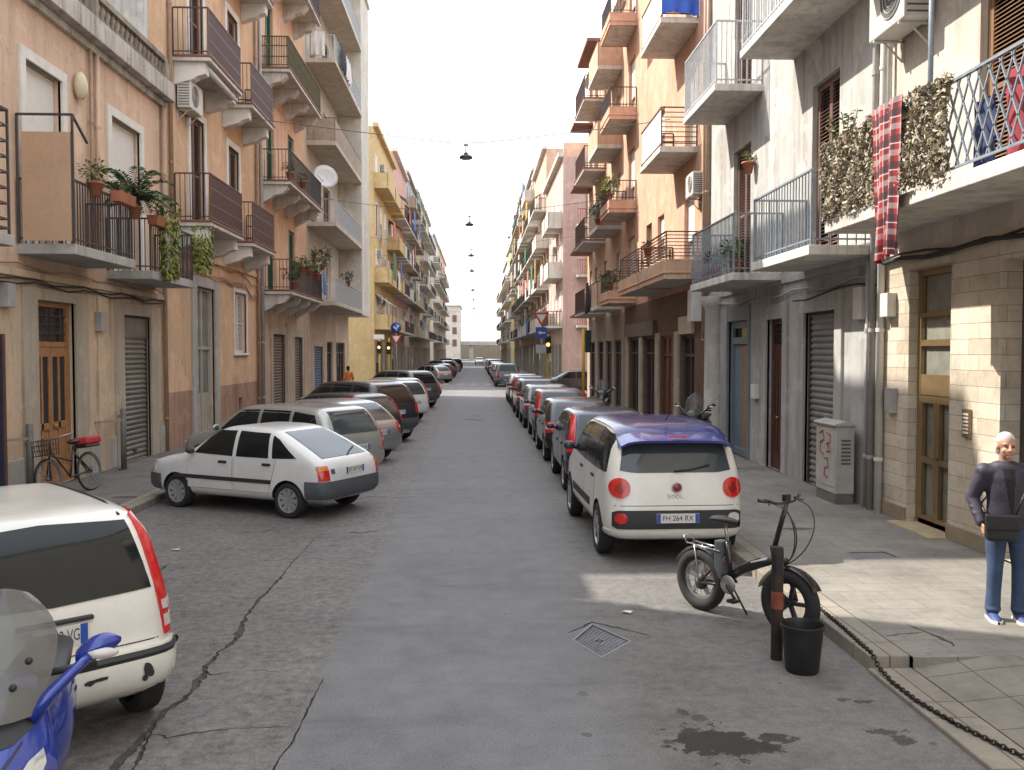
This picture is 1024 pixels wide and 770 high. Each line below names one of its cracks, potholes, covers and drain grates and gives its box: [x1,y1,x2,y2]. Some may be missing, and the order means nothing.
manhole cover [572,623,632,658]
crack [568,622,651,636]
crack [109,531,378,770]
crack [887,624,955,646]
manhole cover [847,551,899,559]
